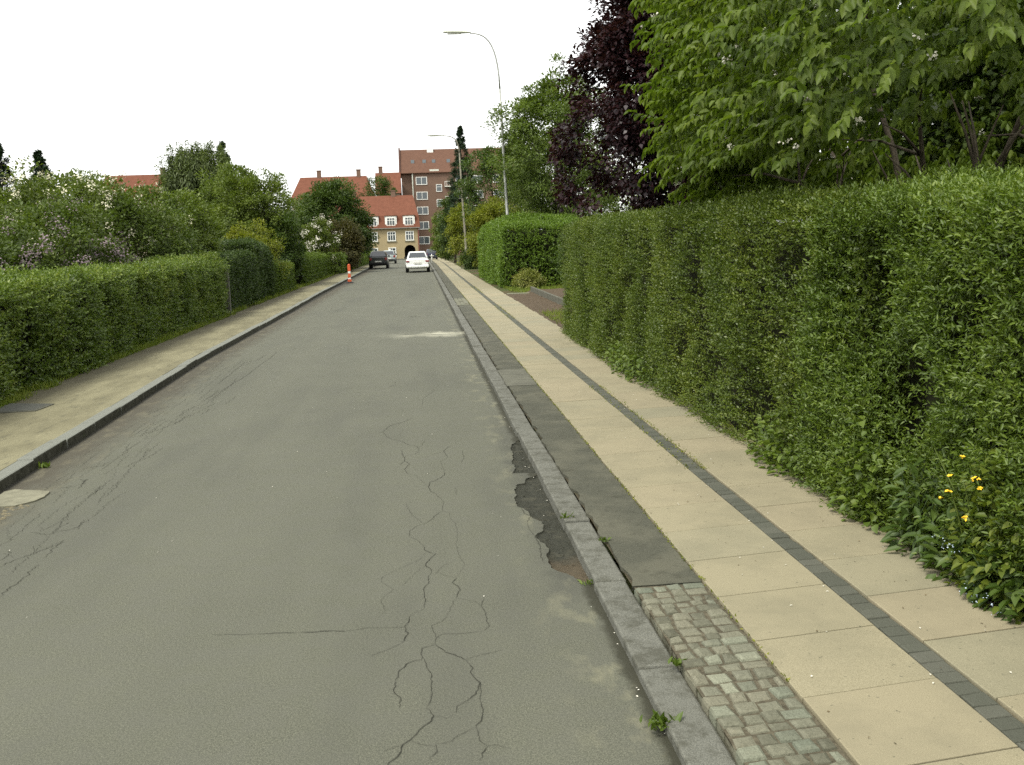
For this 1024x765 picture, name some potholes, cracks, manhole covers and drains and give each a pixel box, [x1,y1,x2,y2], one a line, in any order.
crack [370,473,500,765]
pothole [510,440,536,473]
pothole [514,475,589,583]
manhole cover [0,403,54,414]
